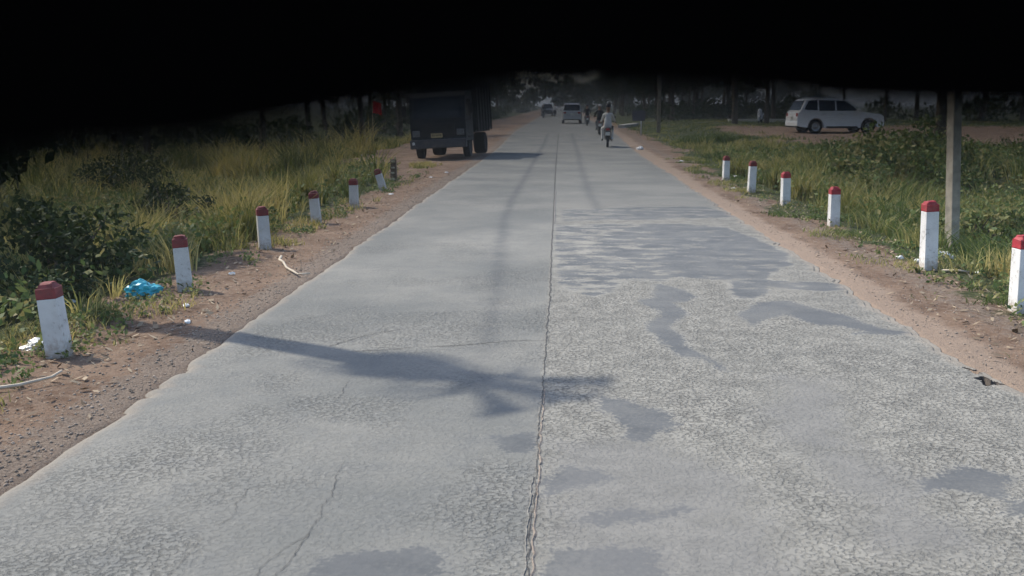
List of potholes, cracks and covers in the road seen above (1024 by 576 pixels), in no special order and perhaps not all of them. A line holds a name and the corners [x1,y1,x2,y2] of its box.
crack [330,154,557,576]
pothole [974,376,1005,386]
crack [255,461,345,576]
